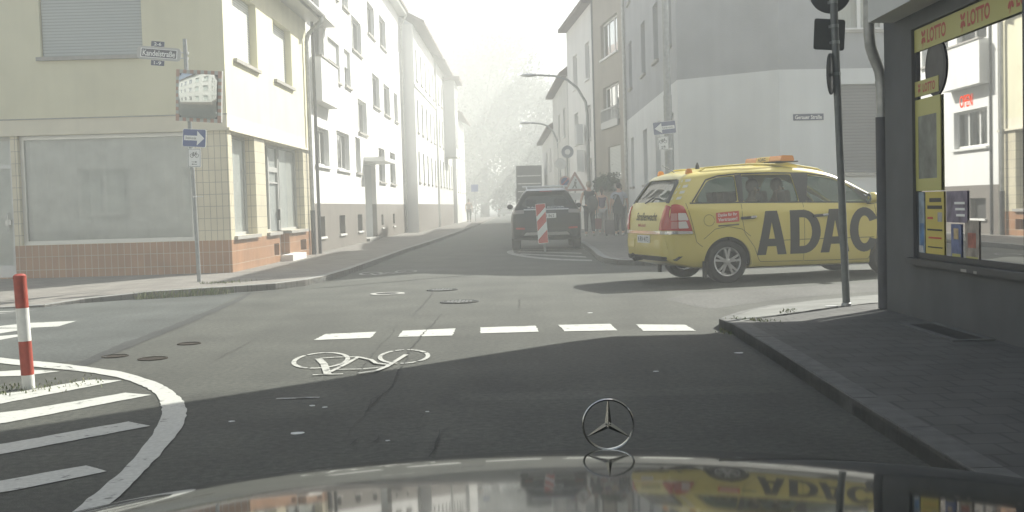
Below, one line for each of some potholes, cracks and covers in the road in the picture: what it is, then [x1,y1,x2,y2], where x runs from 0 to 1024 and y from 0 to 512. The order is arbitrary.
drain grate [899,322,995,342]
crack [344,293,478,457]
